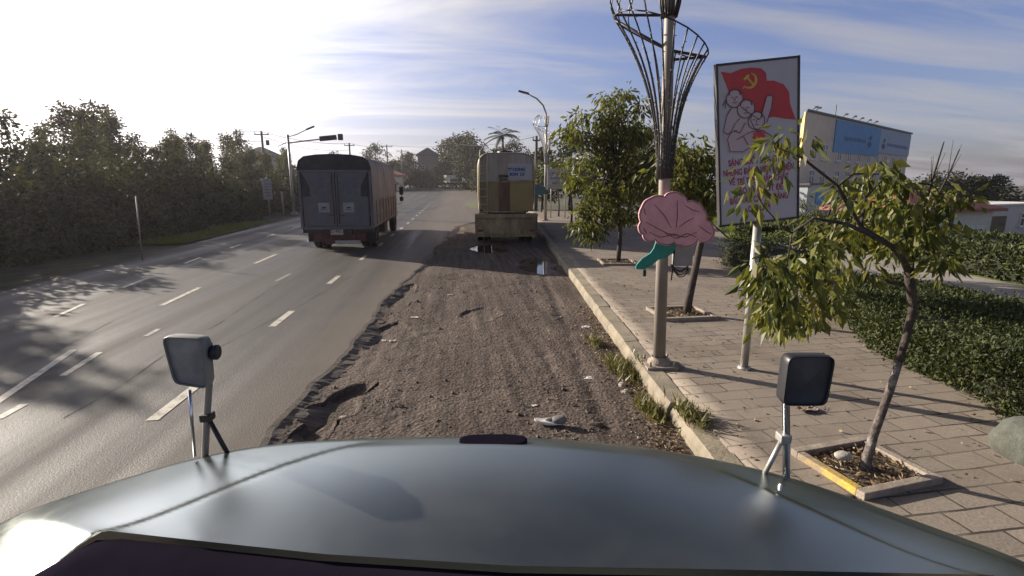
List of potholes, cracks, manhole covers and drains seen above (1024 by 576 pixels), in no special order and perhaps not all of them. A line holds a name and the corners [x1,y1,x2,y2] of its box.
pothole [463,243,516,255]
pothole [512,255,564,277]
